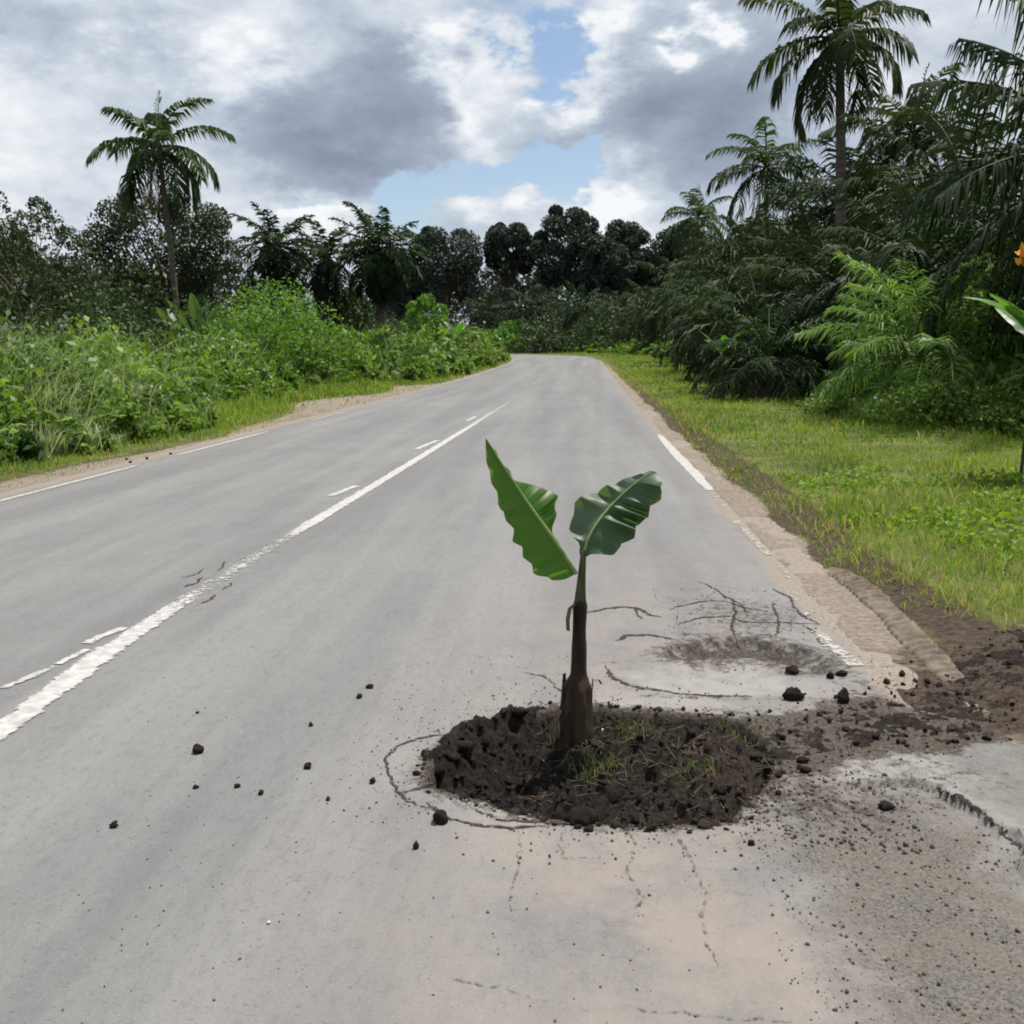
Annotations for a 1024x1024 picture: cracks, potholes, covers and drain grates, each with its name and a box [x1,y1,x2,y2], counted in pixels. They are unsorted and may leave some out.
crack [181,561,232,603]
crack [383,733,590,911]
crack [677,839,719,965]
pothole [409,702,787,833]
crack [605,661,747,697]
crack [588,581,823,648]
crack [627,831,644,906]
